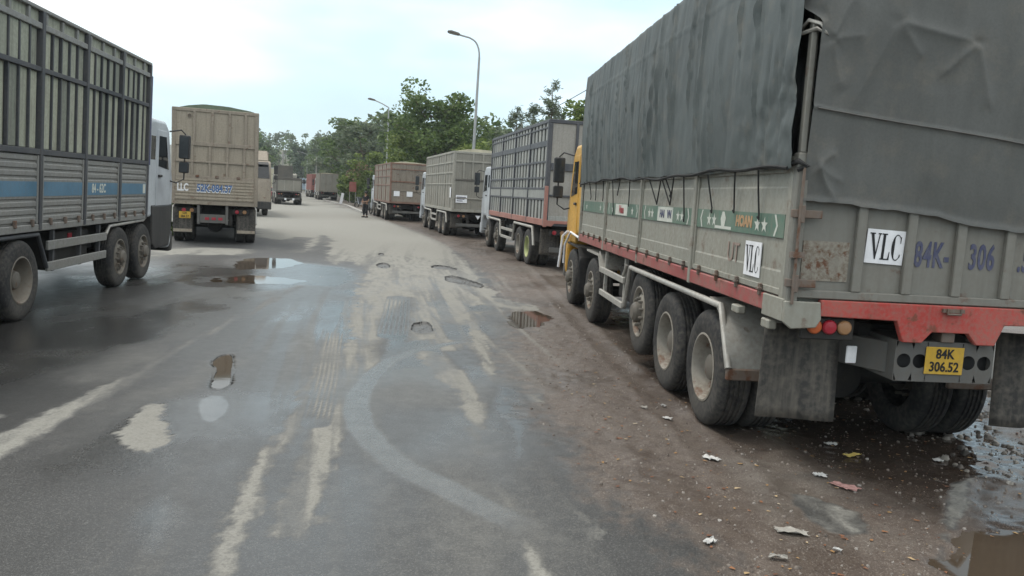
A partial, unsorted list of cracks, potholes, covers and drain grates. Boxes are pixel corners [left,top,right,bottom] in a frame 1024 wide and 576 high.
pothole [440,275,487,288]
pothole [210,353,236,390]
pothole [408,321,436,334]
